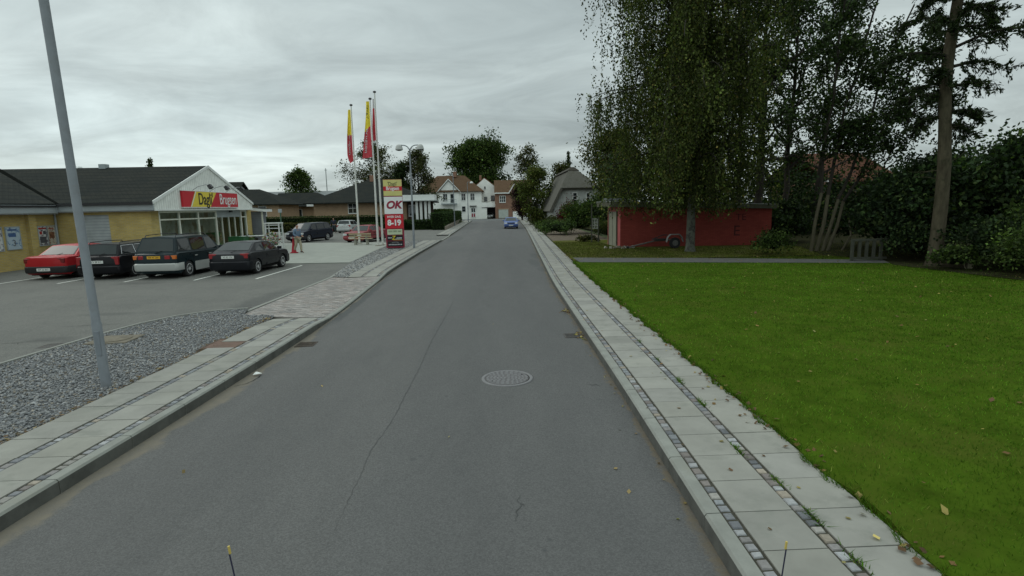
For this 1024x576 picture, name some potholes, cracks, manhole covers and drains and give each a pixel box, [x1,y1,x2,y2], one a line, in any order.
utility cover [82,334,145,345]
manhole cover [482,370,533,387]
utility cover [200,338,252,349]
crack [327,303,453,545]
